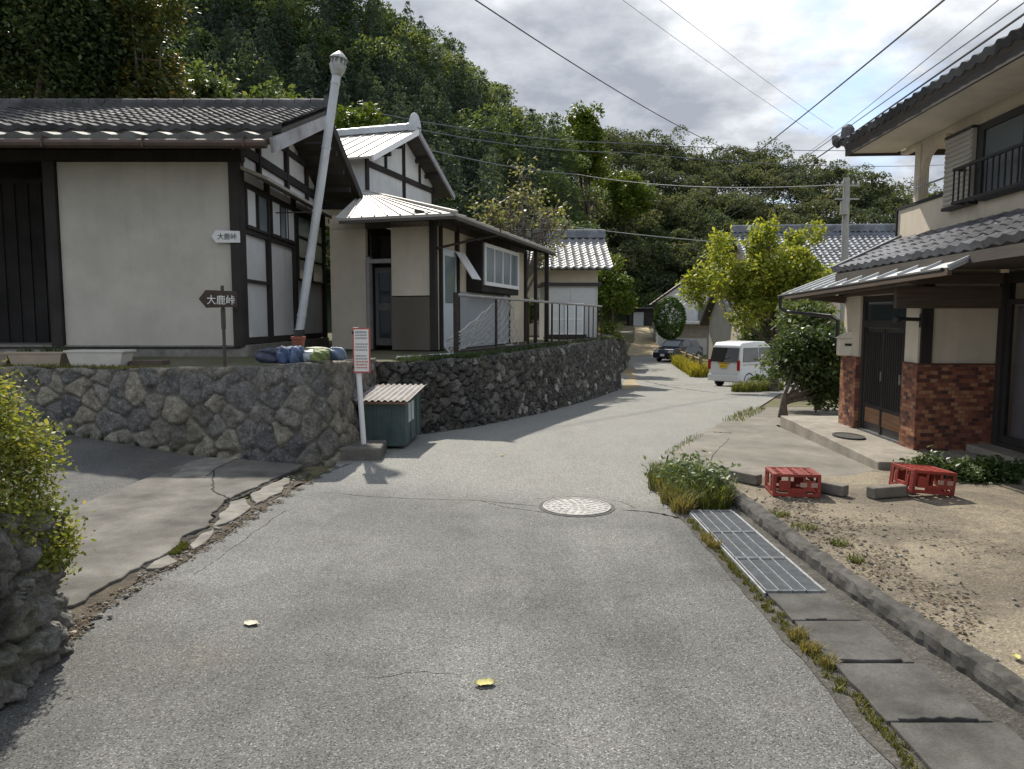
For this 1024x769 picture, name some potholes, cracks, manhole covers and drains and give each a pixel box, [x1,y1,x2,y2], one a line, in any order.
drain grate [690,510,755,532]
crack [142,466,310,574]
crack [349,494,597,513]
drain grate [735,557,823,595]
drain grate [710,531,785,559]
manhole cover [539,497,615,517]
crack [614,500,679,519]
